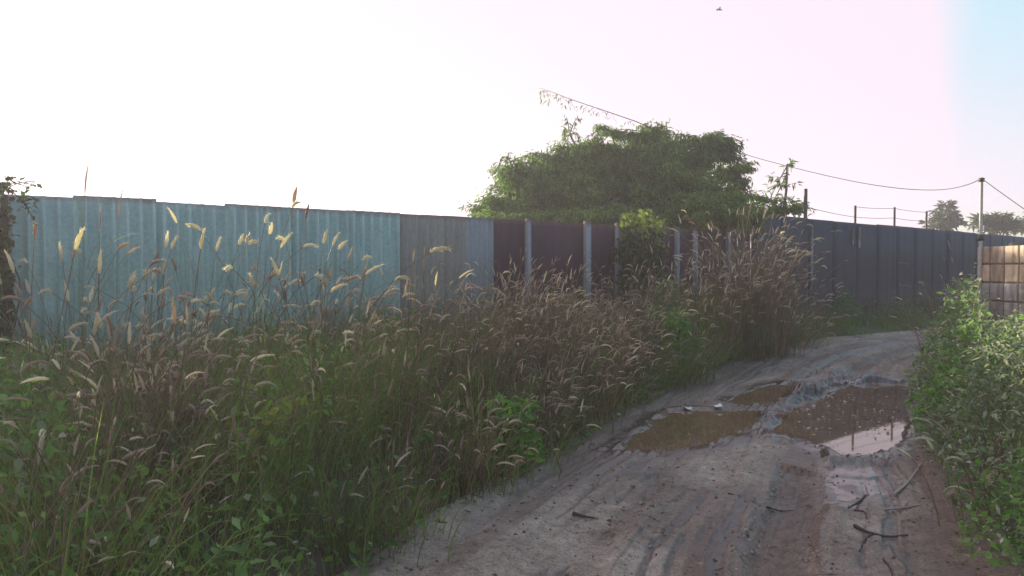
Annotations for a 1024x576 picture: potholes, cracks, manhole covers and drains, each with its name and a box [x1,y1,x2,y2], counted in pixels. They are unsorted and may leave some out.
pothole [728,380,800,407]
pothole [760,375,918,456]
pothole [613,405,789,452]
